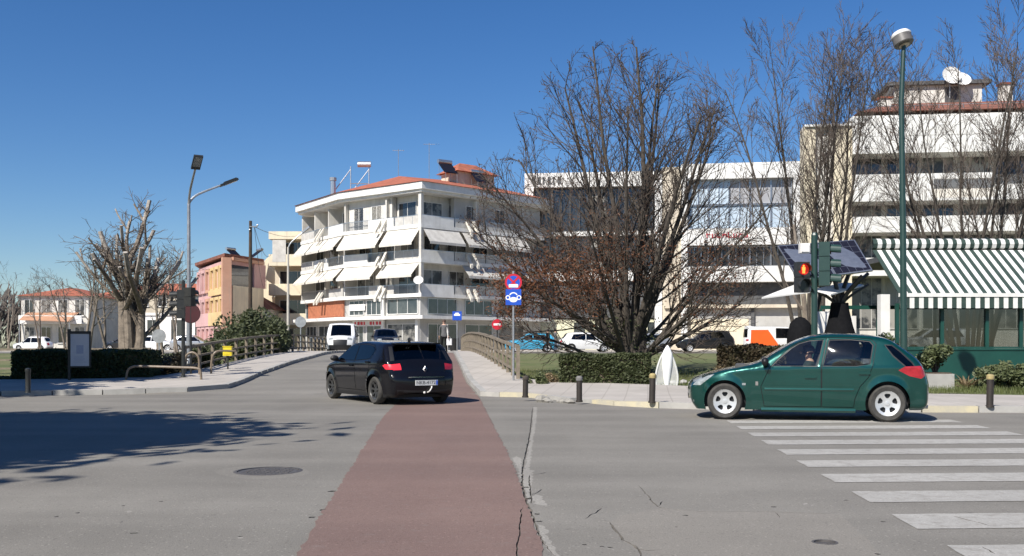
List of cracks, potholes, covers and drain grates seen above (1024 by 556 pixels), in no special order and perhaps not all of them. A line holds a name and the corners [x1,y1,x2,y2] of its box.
crack [585,486,838,556]
manhole cover [233,466,303,476]
crack [516,409,552,556]
